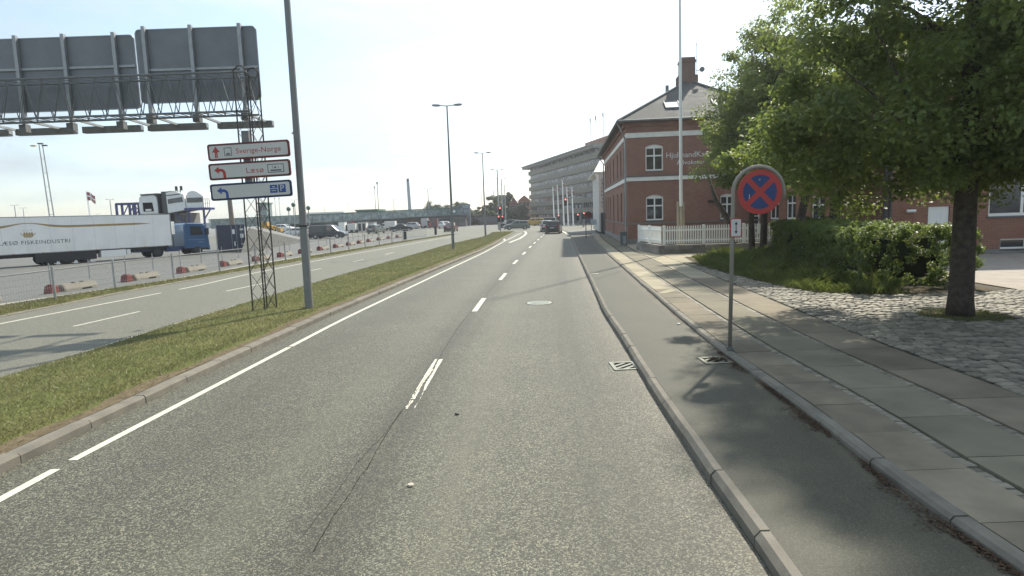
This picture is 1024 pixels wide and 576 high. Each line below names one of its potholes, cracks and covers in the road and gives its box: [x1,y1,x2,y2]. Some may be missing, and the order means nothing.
drain grate [697,356,732,364]
crack [314,313,470,550]
drain grate [608,361,638,370]
